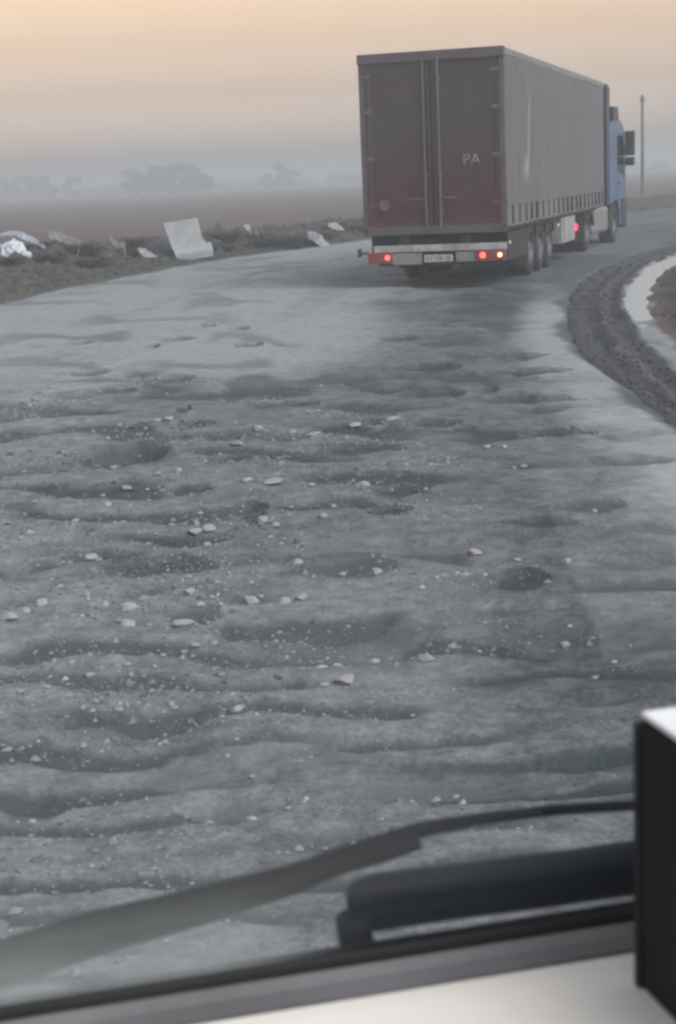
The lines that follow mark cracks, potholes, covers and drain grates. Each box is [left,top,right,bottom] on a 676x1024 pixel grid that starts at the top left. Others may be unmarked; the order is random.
pothole [363,503,413,516]
pothole [96,553,220,579]
pothole [482,567,553,592]
pothole [552,498,628,514]
pothole [362,484,435,498]
pothole [79,440,176,470]
pothole [161,482,216,496]
pothole [290,552,398,579]
